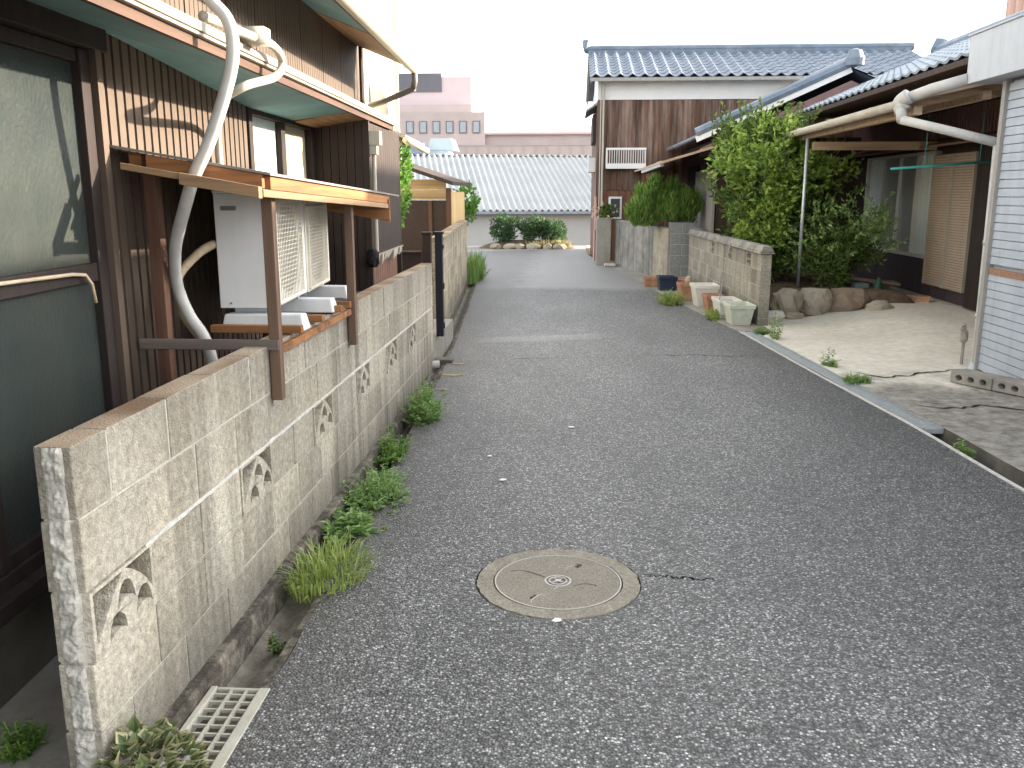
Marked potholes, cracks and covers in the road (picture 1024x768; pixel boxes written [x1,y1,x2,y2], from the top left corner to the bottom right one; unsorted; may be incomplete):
crack [851,369,960,378]
drain grate [152,686,270,768]
manhole cover [476,549,640,620]
